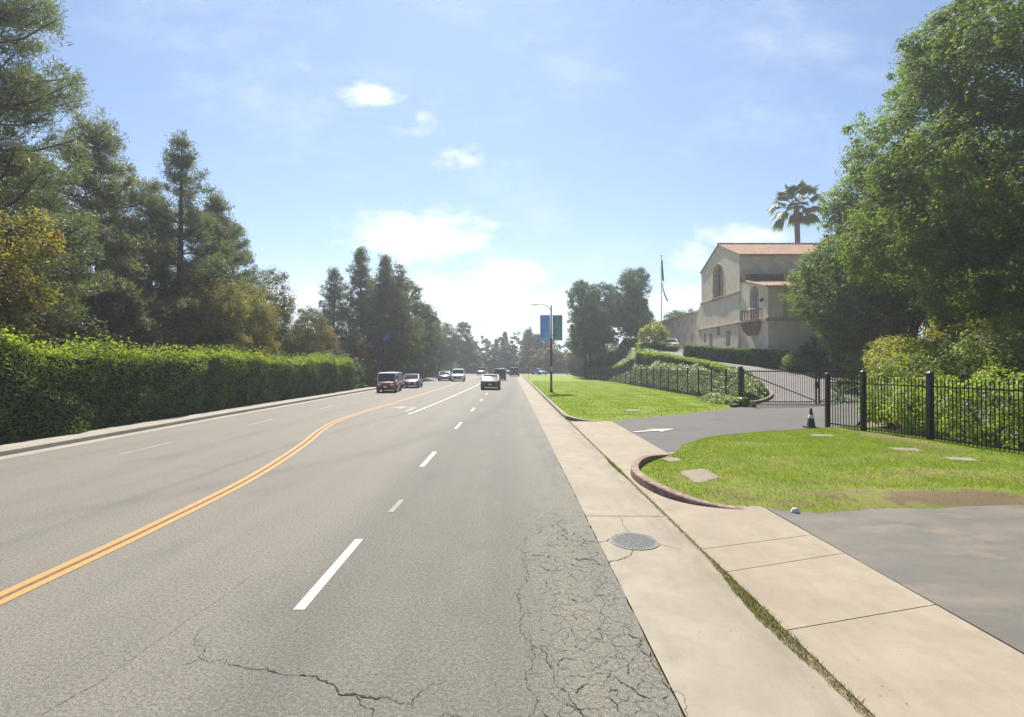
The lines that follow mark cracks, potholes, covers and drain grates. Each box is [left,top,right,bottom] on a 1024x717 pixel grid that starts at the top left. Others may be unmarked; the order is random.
crack [188,630,439,717]
crack [515,452,688,717]
manhole cover [609,533,660,550]
